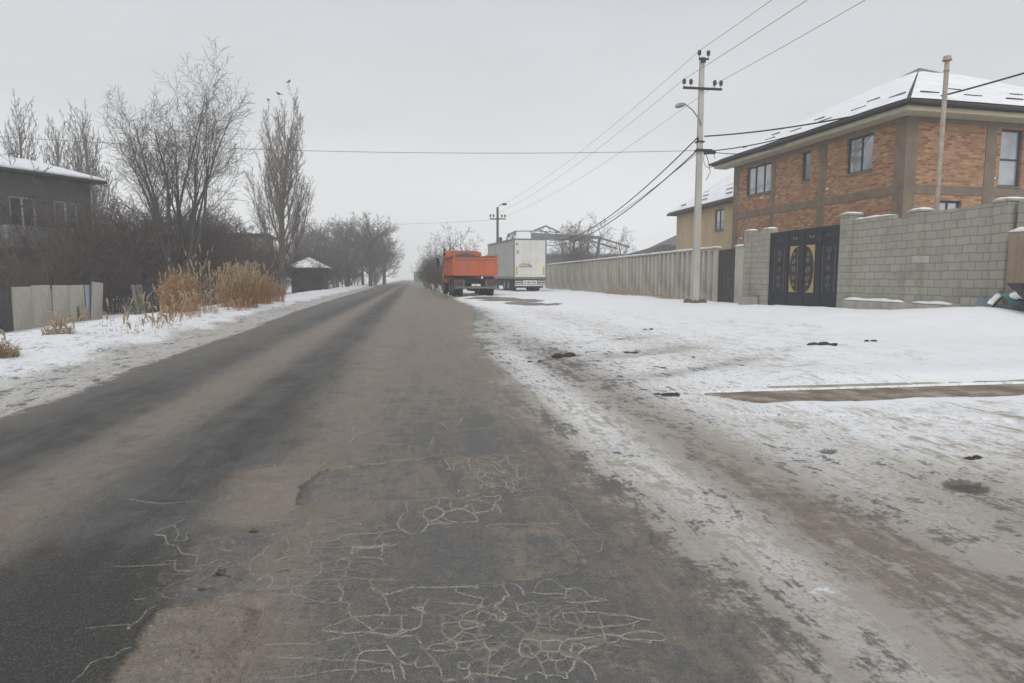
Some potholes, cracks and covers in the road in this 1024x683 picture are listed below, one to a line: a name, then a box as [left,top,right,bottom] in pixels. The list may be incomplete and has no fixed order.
crack [265,568,667,682]
pothole [283,454,468,509]
crack [130,499,239,598]
crack [250,411,605,591]
